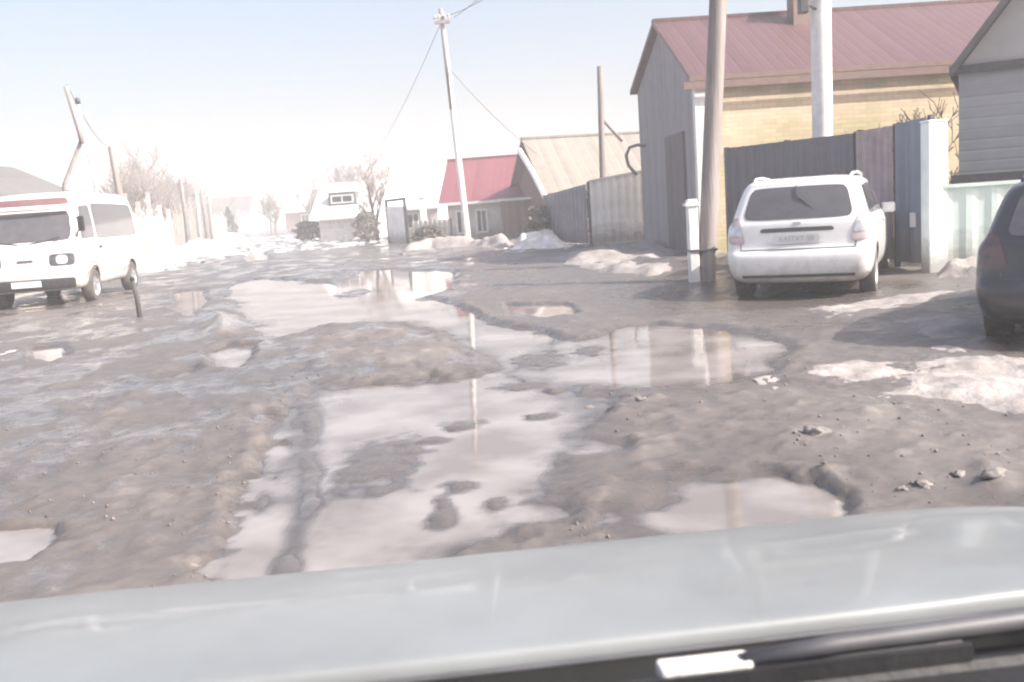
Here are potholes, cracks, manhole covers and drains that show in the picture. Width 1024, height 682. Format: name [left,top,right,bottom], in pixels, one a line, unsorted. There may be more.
pothole [188,338,271,370]
pothole [14,340,83,363]
pothole [569,456,882,543]
pothole [158,365,659,583]
pothole [496,300,592,319]
pothole [217,267,562,372]
pothole [161,286,217,318]
pothole [0,514,93,568]
pothole [507,319,809,391]
